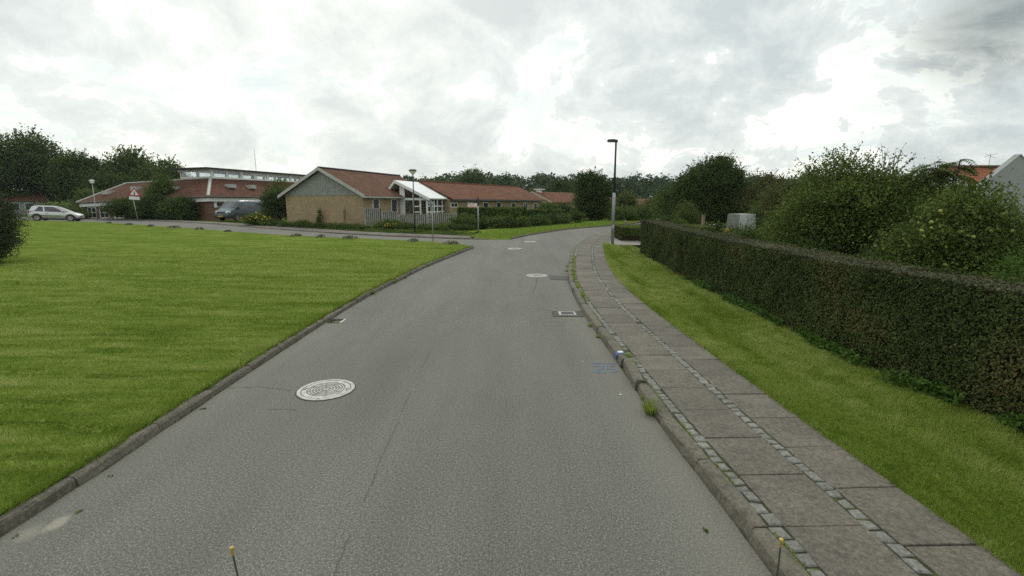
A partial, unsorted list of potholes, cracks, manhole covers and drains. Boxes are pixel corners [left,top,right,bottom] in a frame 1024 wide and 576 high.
manhole cover [295,379,356,401]
